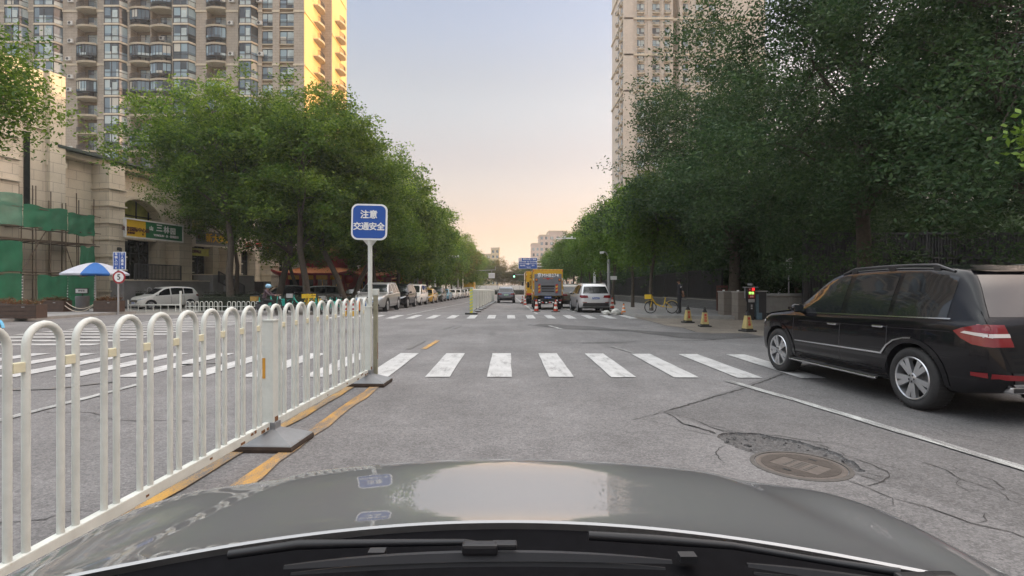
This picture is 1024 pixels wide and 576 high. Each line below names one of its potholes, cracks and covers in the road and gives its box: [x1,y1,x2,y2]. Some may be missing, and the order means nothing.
pothole [717,432,865,472]
manhole cover [750,451,855,482]
crack [630,364,810,460]
crack [777,435,1024,537]
